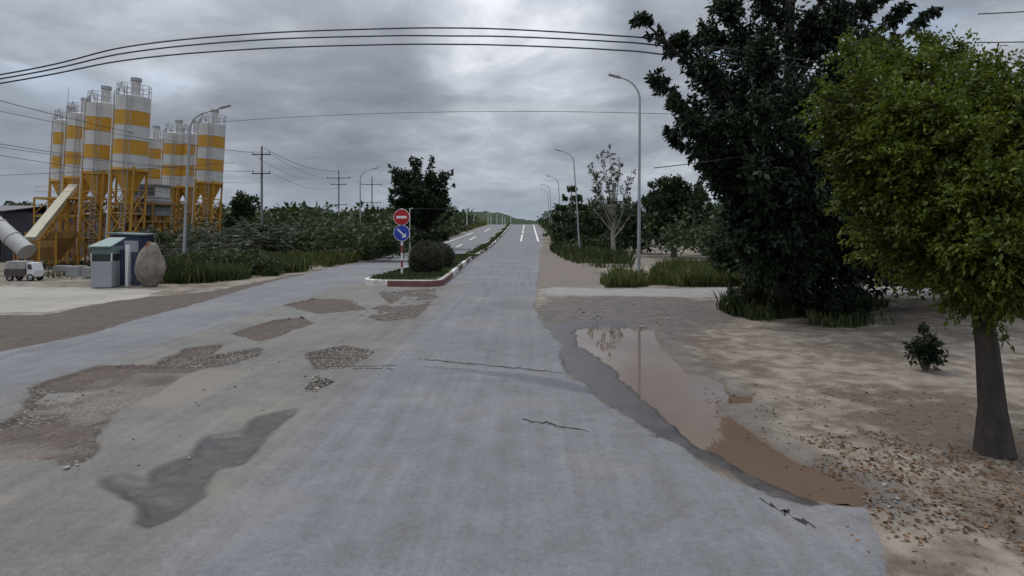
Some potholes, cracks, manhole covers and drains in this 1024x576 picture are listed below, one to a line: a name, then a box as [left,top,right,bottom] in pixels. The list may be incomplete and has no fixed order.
crack [759,497,816,528]
pothole [301,345,372,370]
crack [523,418,589,432]
pothole [297,377,338,393]
crack [421,359,564,374]
pothole [351,288,447,322]
pothole [0,343,267,471]
